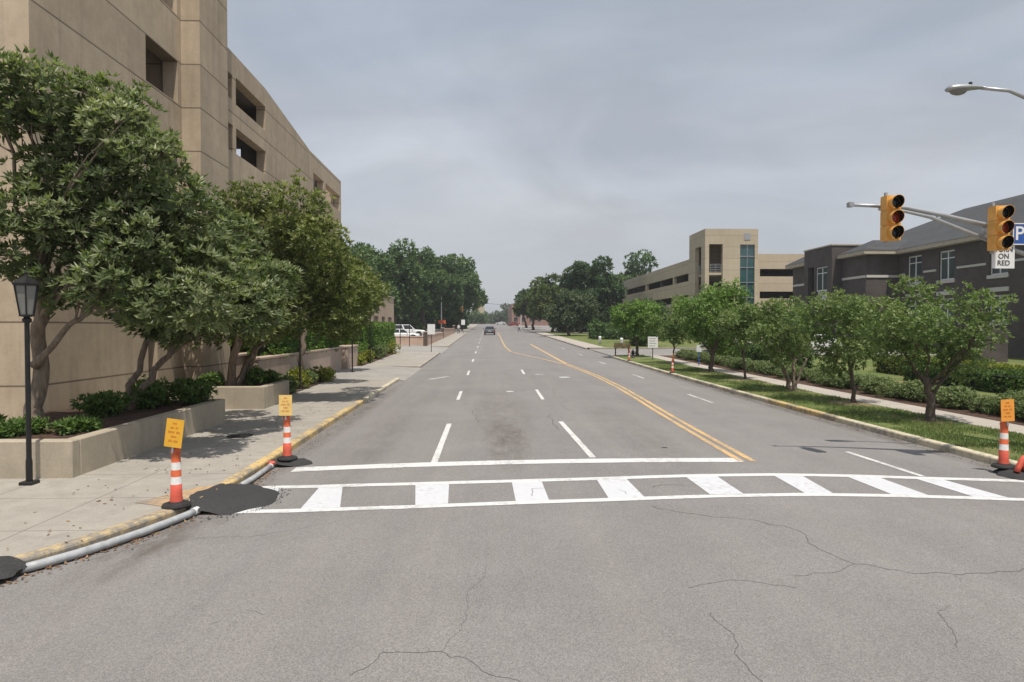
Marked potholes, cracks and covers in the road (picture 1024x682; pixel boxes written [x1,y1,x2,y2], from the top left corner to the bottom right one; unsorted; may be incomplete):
crack [655,507,1024,588]
crack [351,575,521,682]
